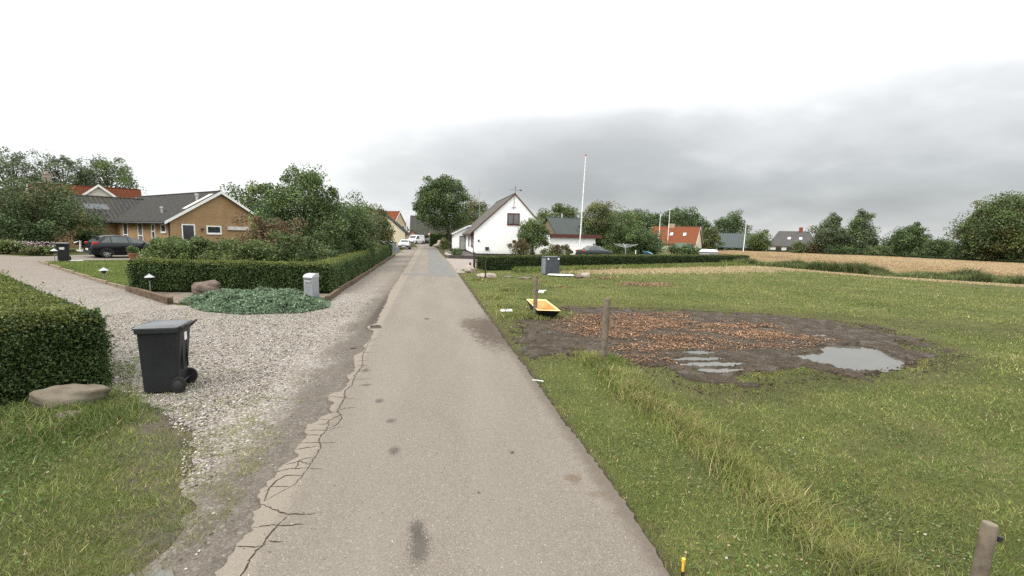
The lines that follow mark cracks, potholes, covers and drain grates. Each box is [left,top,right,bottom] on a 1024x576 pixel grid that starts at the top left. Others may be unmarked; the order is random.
crack [238,344,373,576]
